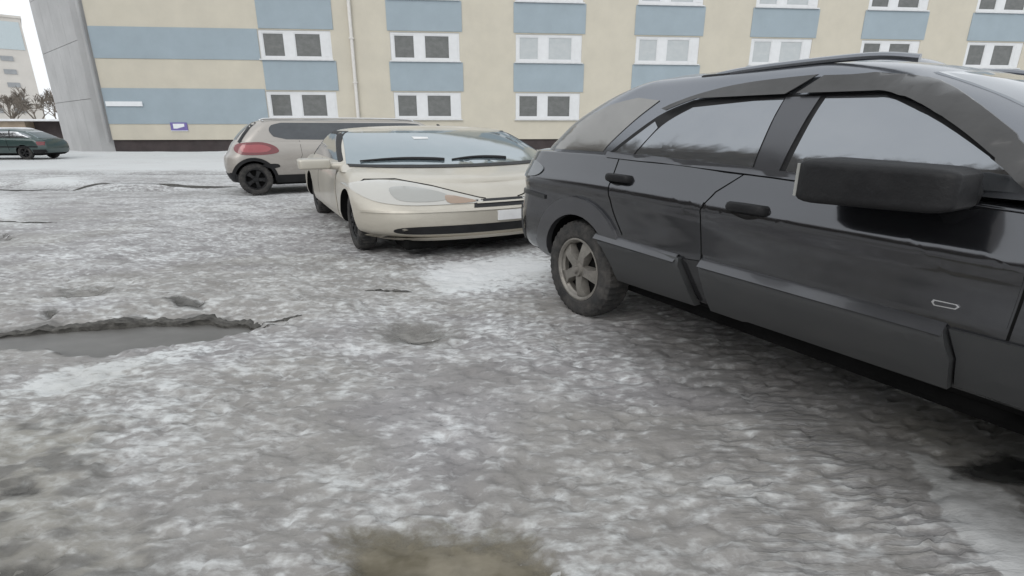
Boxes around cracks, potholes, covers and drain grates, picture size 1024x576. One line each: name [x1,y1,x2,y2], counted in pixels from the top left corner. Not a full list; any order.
crack [0,183,236,191]
pothole [334,525,553,576]
pothole [391,325,440,344]
crack [256,315,301,329]
pothole [0,314,261,358]
pothole [169,296,203,308]
